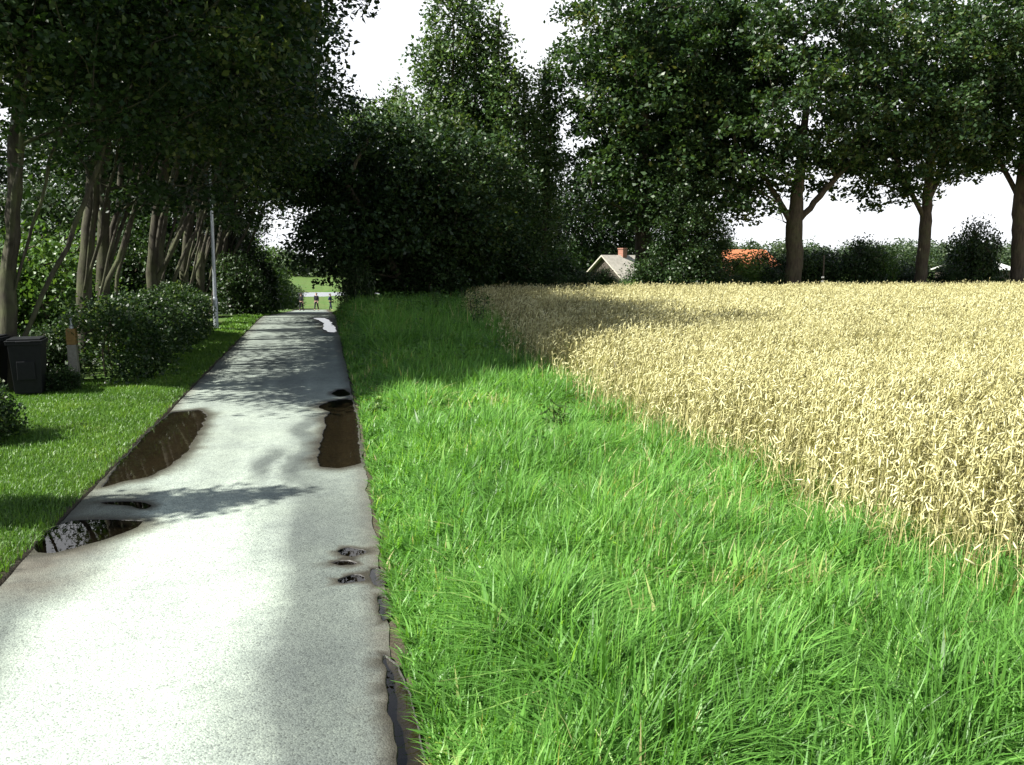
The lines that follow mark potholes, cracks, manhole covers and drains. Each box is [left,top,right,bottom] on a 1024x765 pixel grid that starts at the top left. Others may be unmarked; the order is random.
pothole [338,574,366,583]
pothole [377,595,392,621]
pothole [382,654,425,765]
pothole [100,501,152,509]
pothole [34,519,143,553]
pothole [338,547,367,557]
